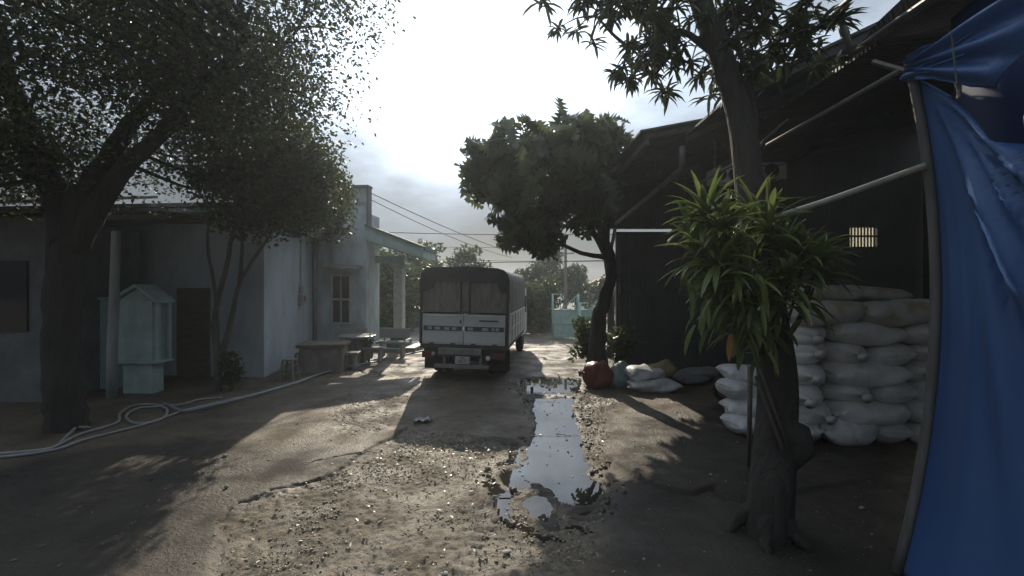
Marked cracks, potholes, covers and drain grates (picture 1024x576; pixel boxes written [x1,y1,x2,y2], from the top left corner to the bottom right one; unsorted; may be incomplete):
crack [221,428,407,522]
pothole [506,396,615,511]
pothole [514,376,586,396]
